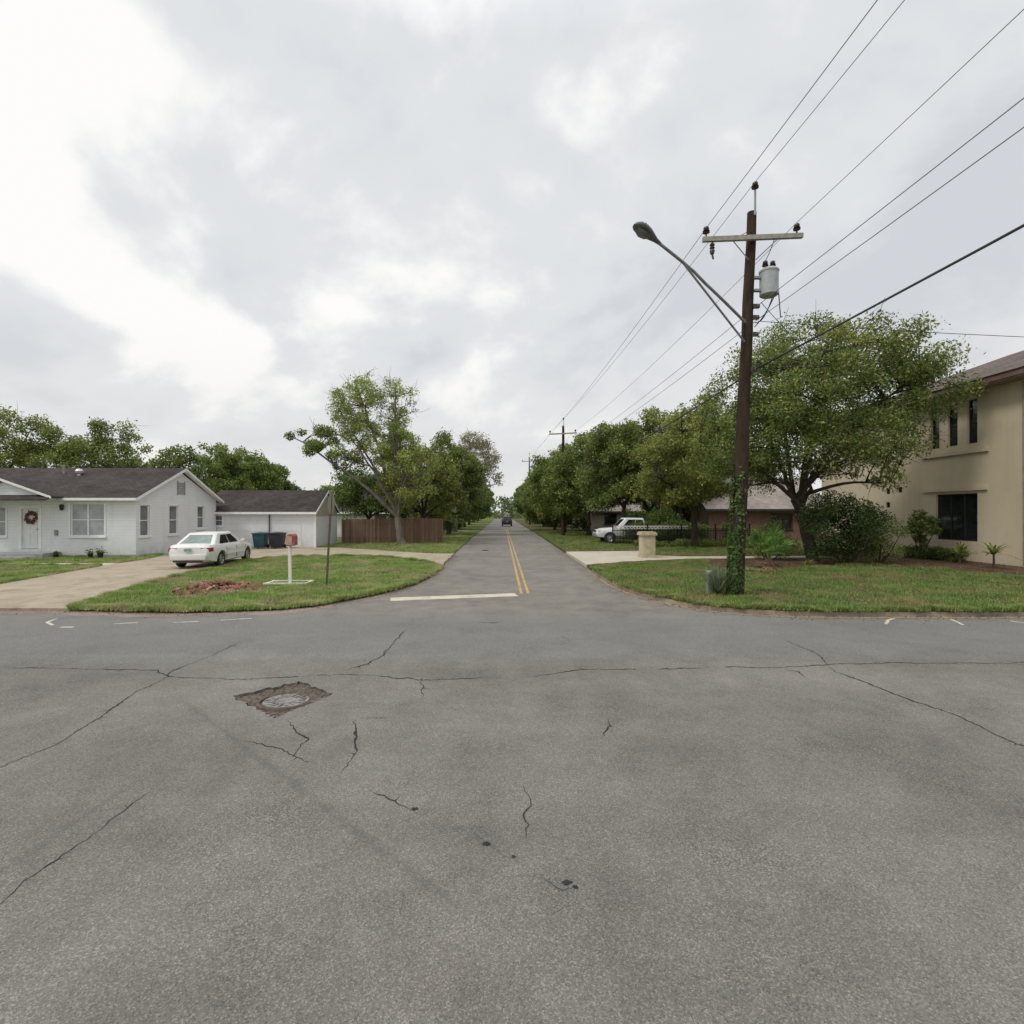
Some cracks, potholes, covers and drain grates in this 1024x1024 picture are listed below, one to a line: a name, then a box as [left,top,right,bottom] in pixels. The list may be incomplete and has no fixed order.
crack [342,721,358,771]
manhole cover [255,692,315,712]
pothole [234,681,332,719]
crack [245,721,309,761]
crack [21,632,1024,746]
crack [539,874,579,890]
crack [373,792,418,811]
crack [0,793,147,904]
